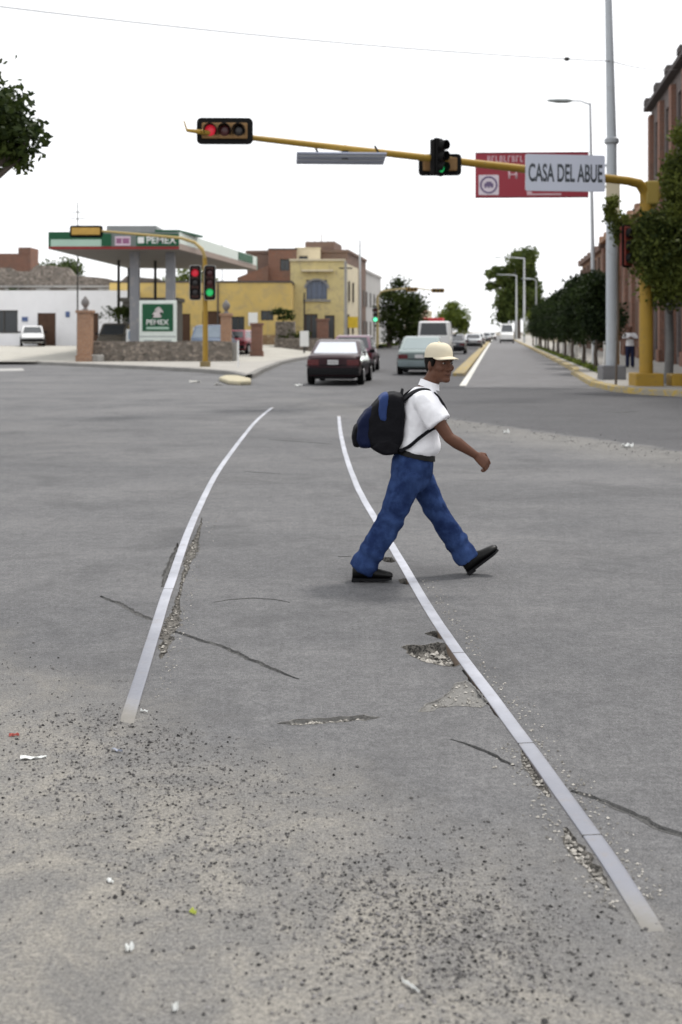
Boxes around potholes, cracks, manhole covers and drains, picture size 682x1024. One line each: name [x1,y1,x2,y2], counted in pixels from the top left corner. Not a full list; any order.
crack [450,739,552,798]
pothole [277,714,381,725]
pothole [418,680,488,712]
pothole [402,642,460,667]
